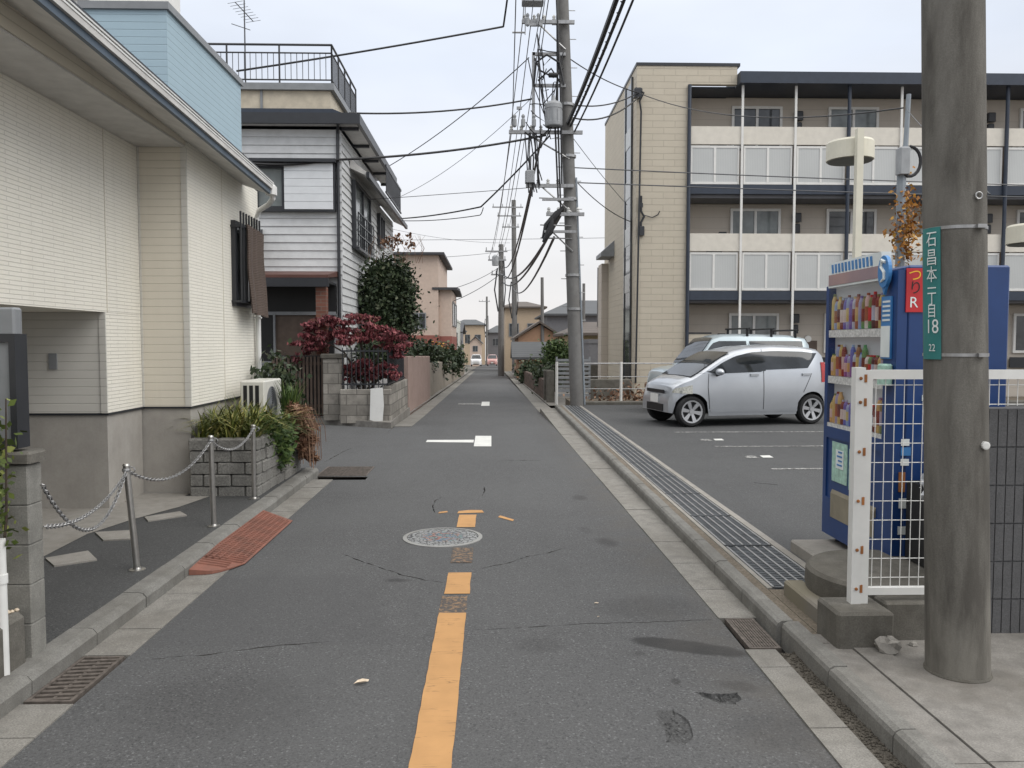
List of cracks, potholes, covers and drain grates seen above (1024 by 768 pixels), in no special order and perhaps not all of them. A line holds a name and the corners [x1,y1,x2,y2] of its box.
drain grate [318,466,375,480]
crack [477,620,691,630]
crack [160,642,319,659]
drain grate [724,618,786,654]
drain grate [24,656,125,704]
pothole [657,710,693,744]
pothole [696,692,741,704]
manhole cover [403,528,482,548]
